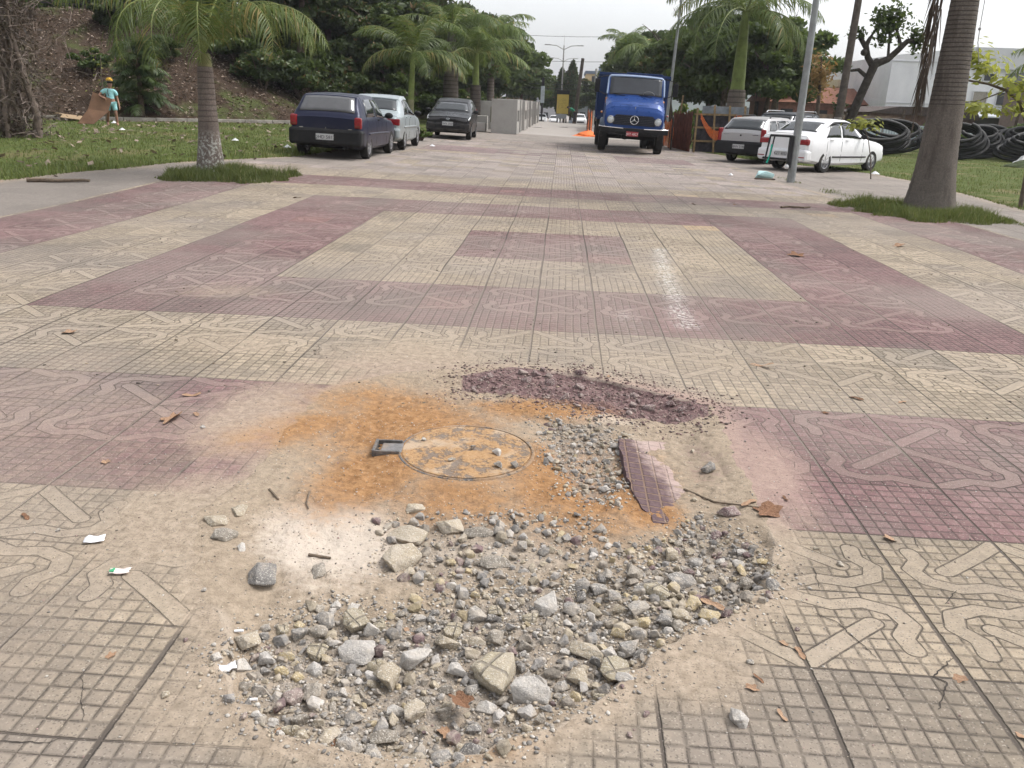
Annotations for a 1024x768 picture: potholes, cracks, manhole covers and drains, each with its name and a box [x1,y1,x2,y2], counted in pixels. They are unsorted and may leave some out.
crack [933,658,953,709]
pothole [192,367,778,761]
manhole cover [372,425,535,481]
